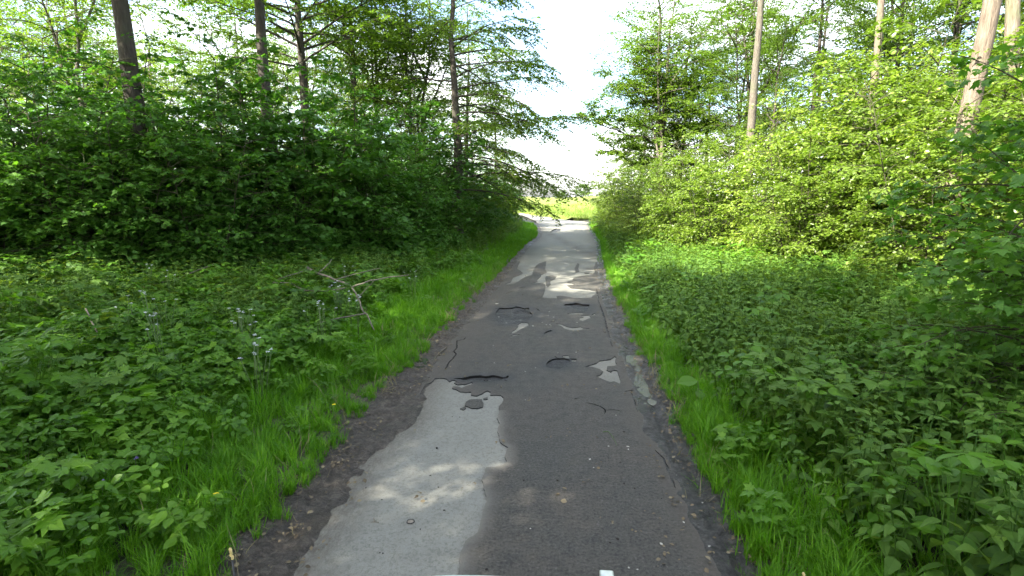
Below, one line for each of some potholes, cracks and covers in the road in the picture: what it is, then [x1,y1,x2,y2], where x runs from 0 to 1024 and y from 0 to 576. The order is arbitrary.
pothole [546,358,569,369]
pothole [495,306,533,324]
